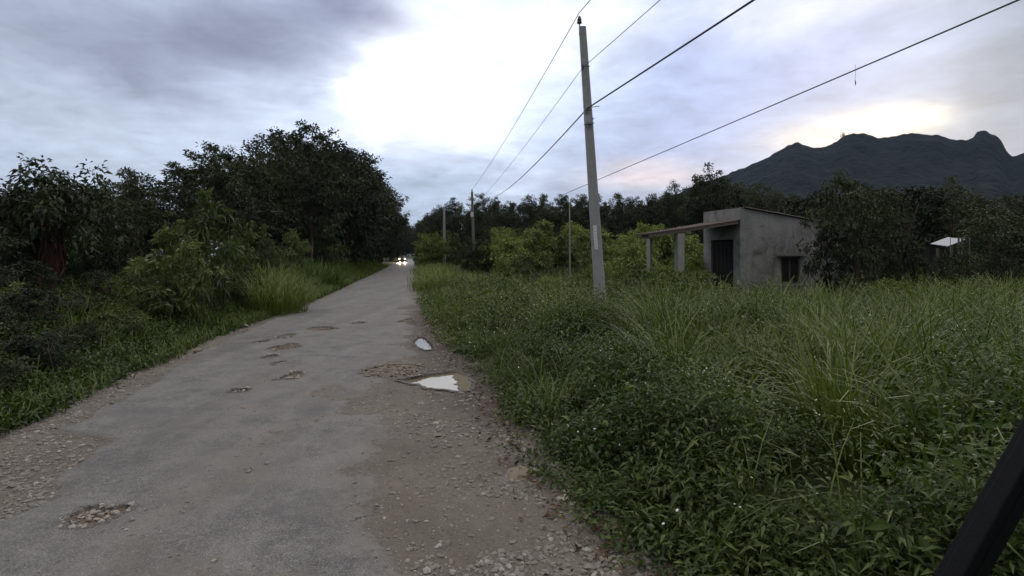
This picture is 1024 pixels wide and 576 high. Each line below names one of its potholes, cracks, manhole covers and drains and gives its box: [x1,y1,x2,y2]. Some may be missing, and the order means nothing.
pothole [410,336,437,351]
pothole [265,342,303,352]
pothole [271,370,307,381]
pothole [390,371,477,392]
pothole [358,363,428,379]
pothole [57,501,140,530]
